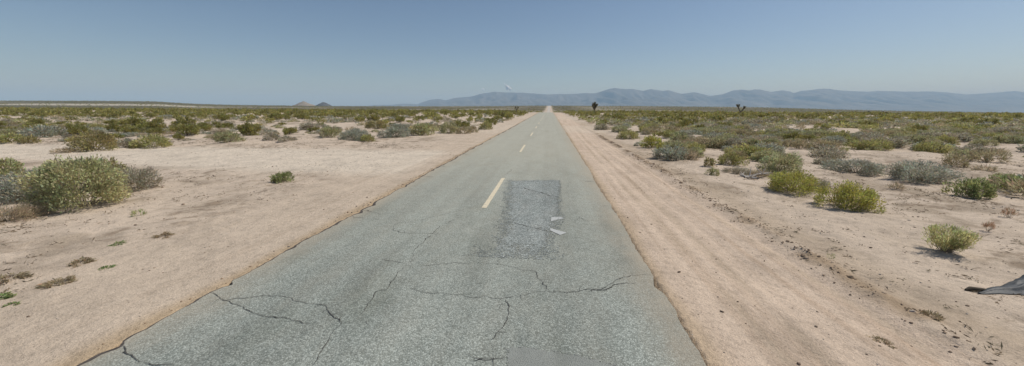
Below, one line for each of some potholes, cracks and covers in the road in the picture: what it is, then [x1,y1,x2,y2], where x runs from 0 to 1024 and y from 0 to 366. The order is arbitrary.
crack [469,301,511,364]
crack [213,292,342,364]
crack [362,210,629,324]
crack [122,345,173,365]
